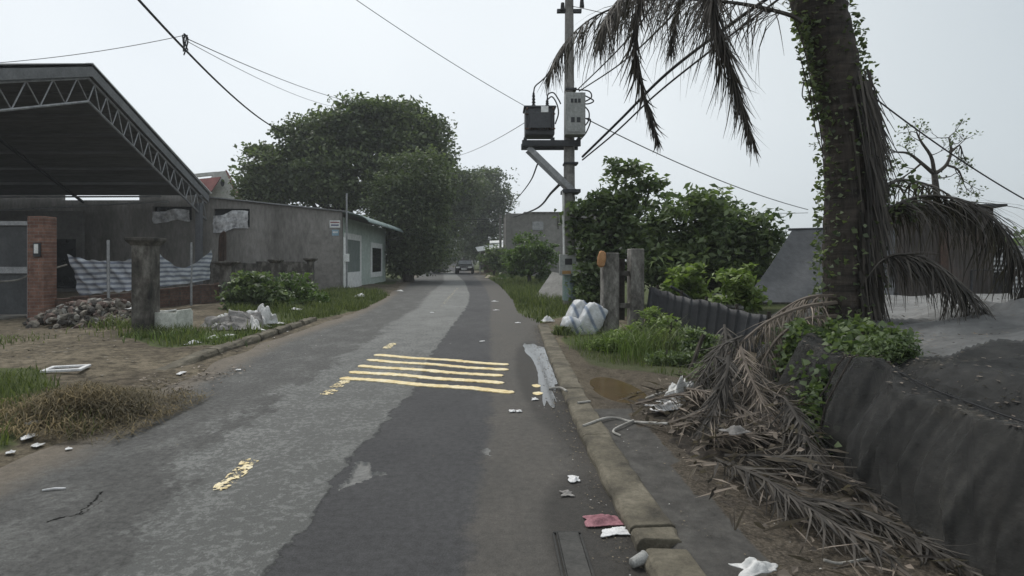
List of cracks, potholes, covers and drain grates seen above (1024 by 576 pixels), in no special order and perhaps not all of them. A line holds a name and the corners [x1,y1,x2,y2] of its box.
crack [46,492,102,523]
